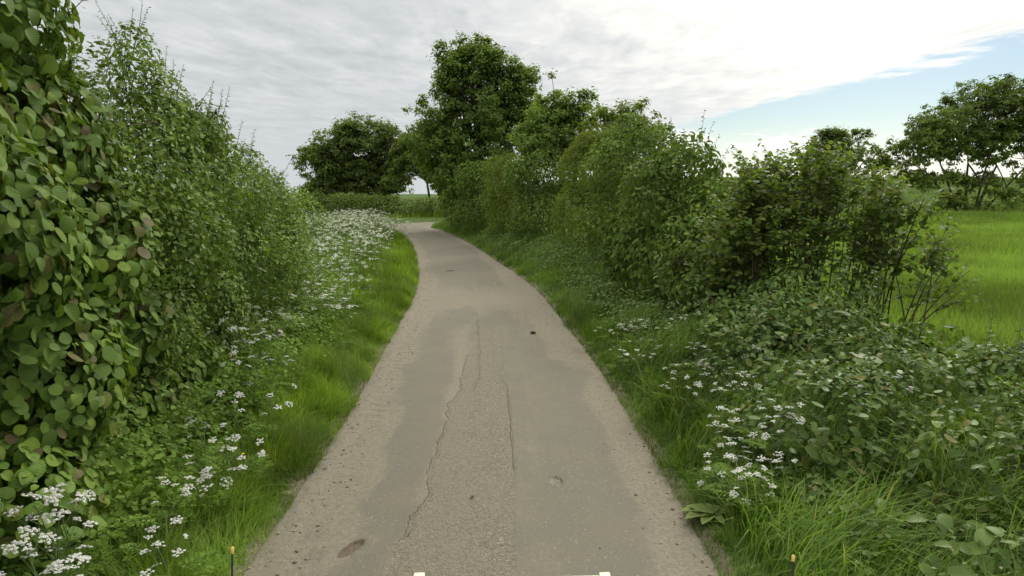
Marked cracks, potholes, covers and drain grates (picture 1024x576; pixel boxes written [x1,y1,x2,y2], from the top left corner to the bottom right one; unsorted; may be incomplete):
crack [502,381,517,476]
pothole [545,475,566,487]
crack [393,319,481,546]
